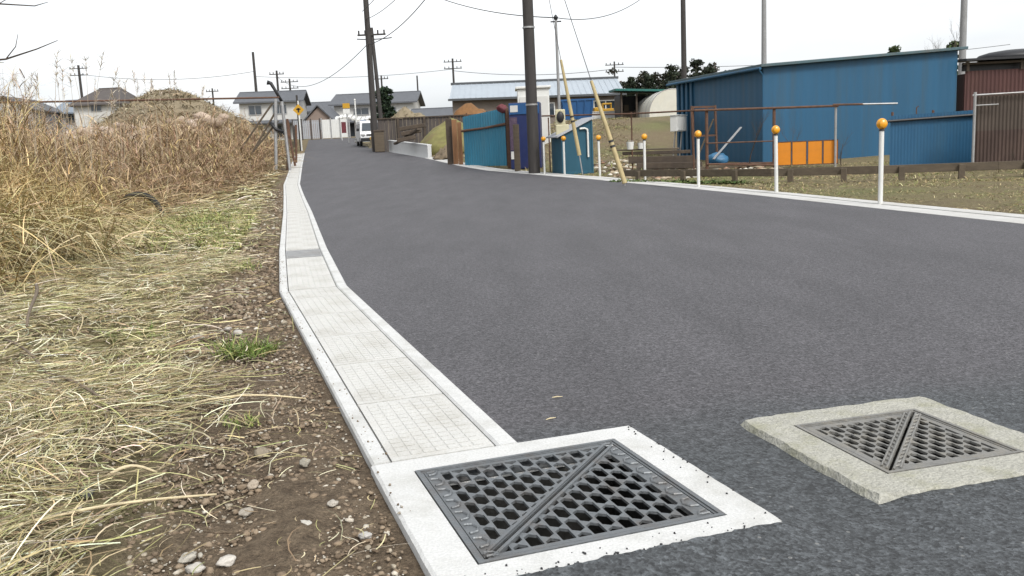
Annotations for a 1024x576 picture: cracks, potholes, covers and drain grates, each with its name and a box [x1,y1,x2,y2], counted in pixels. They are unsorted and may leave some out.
drain grate [371,426,782,576]
drain grate [741,396,1024,504]
